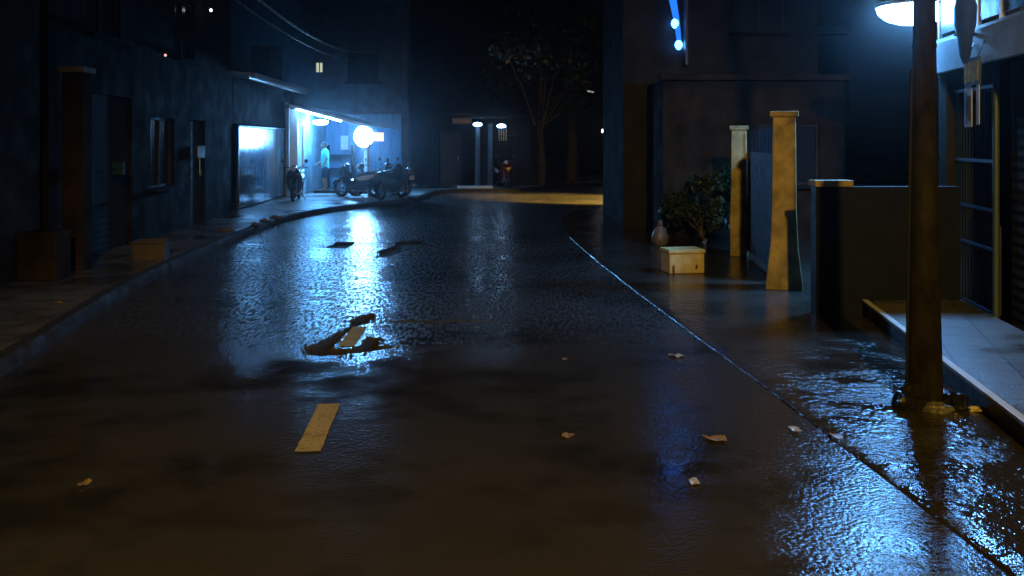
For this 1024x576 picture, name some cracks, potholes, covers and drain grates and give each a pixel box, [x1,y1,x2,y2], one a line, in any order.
pothole [301,312,400,357]
pothole [322,241,360,249]
pothole [370,240,427,259]
